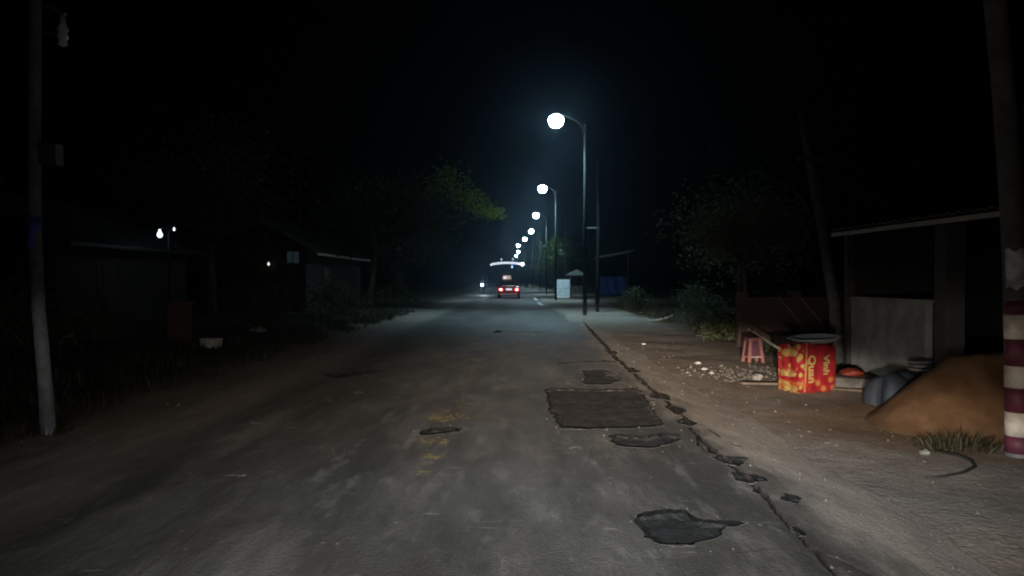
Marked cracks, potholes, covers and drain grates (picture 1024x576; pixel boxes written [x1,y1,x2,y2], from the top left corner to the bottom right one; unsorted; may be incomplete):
pothole [419,427,463,435]
pothole [579,369,622,385]
pothole [633,508,748,548]
crack [554,322,876,576]
pothole [608,432,683,448]
